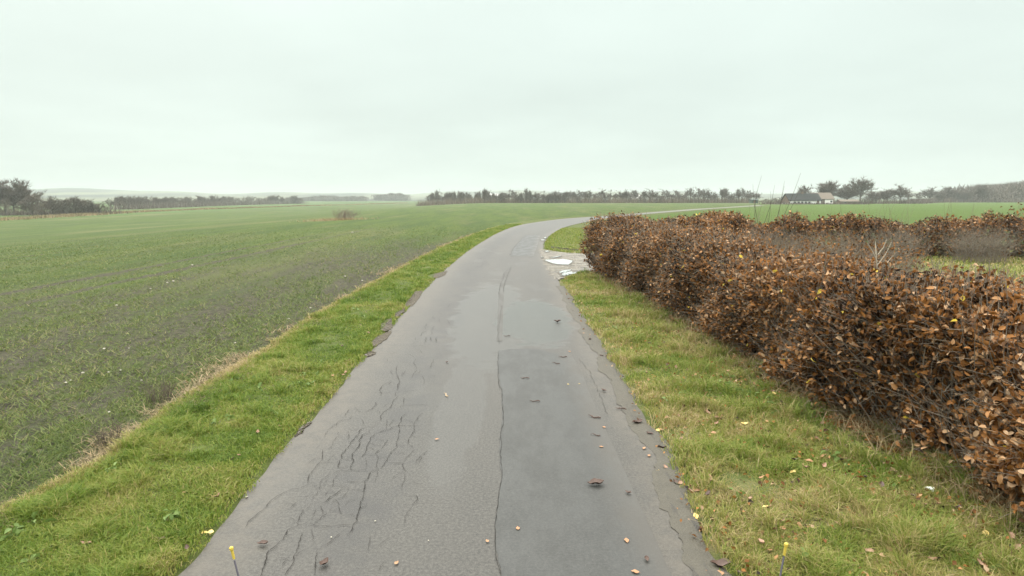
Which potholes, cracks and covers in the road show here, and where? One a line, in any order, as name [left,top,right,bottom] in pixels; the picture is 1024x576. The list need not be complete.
crack [246,318,454,575]
